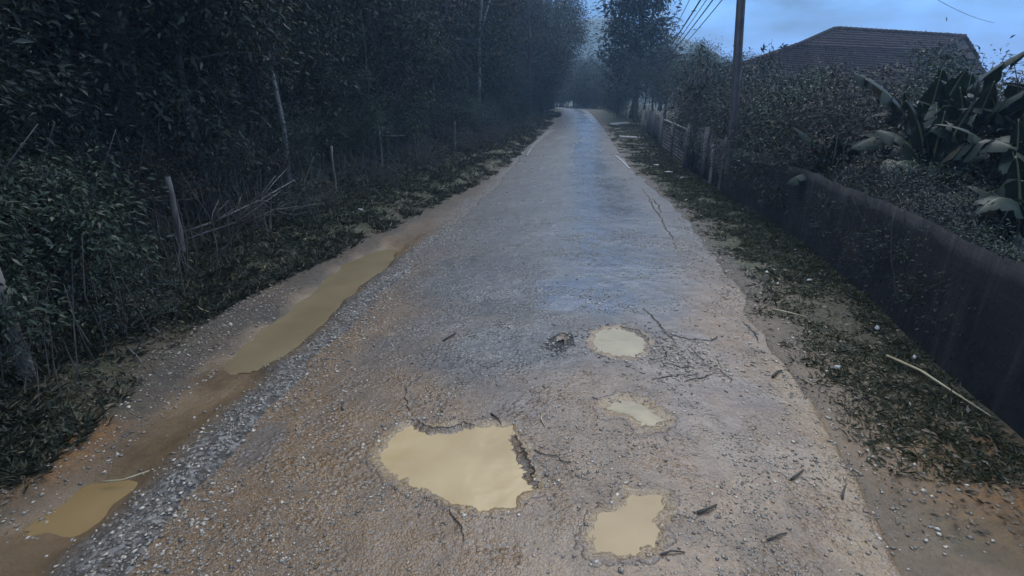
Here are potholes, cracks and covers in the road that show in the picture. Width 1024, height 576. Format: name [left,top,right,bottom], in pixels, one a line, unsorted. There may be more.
crack [642,188,677,249]
crack [643,307,733,383]
crack [404,358,441,410]
pothole [544,333,575,352]
pothole [359,412,550,518]
pothole [573,481,681,568]
pothole [590,390,679,438]
pothole [581,324,656,361]
